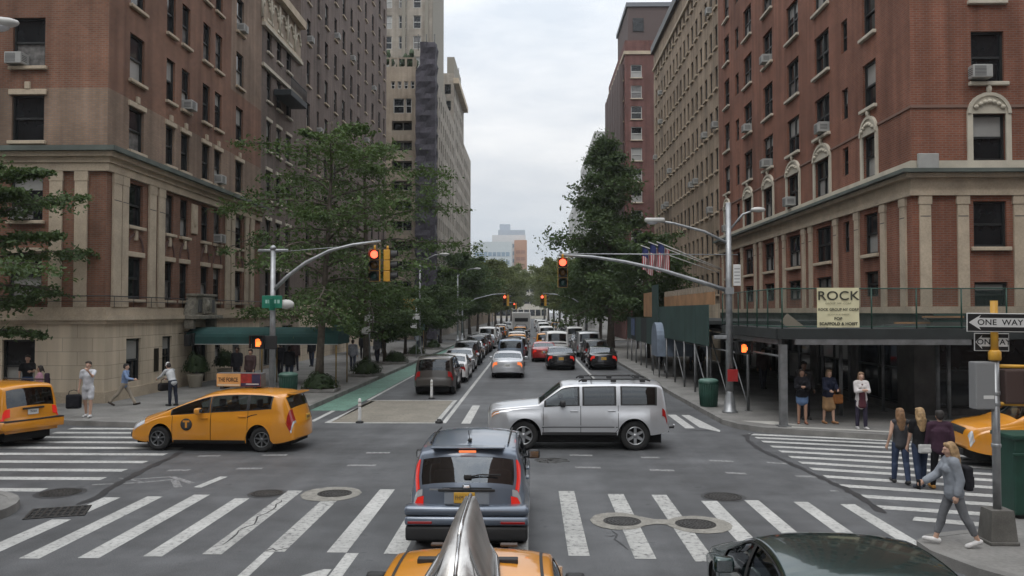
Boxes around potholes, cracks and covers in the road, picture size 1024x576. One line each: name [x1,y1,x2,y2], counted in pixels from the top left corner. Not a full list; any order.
manhole cover [590,512,675,530]
drain grate [22,505,92,520]
manhole cover [32,487,87,499]
crack [224,500,282,544]
manhole cover [300,487,362,501]
manhole cover [700,492,746,502]
manhole cover [669,516,733,533]
manhole cover [247,489,287,498]
